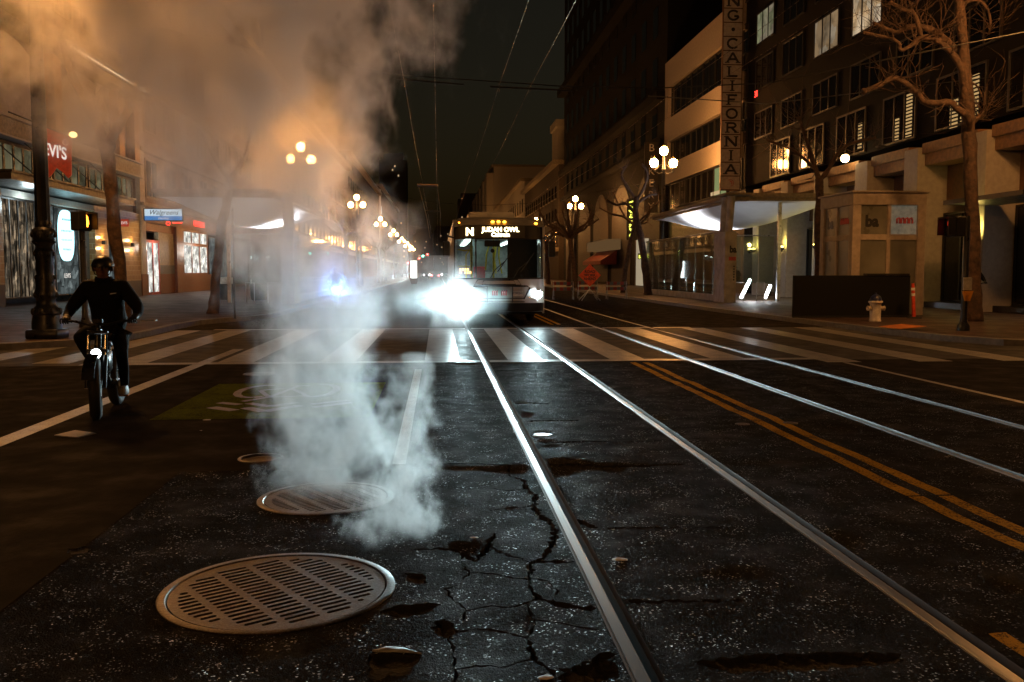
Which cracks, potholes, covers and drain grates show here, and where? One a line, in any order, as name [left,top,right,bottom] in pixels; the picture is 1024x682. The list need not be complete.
manhole cover [238,453,284,463]
pothole [380,603,441,619]
manhole cover [155,553,395,636]
pothole [405,573,428,584]
pothole [367,652,421,680]
manhole cover [257,482,394,516]
pothole [694,651,904,674]
crack [414,463,725,682]
pothole [430,619,459,641]
pothole [557,658,619,682]
